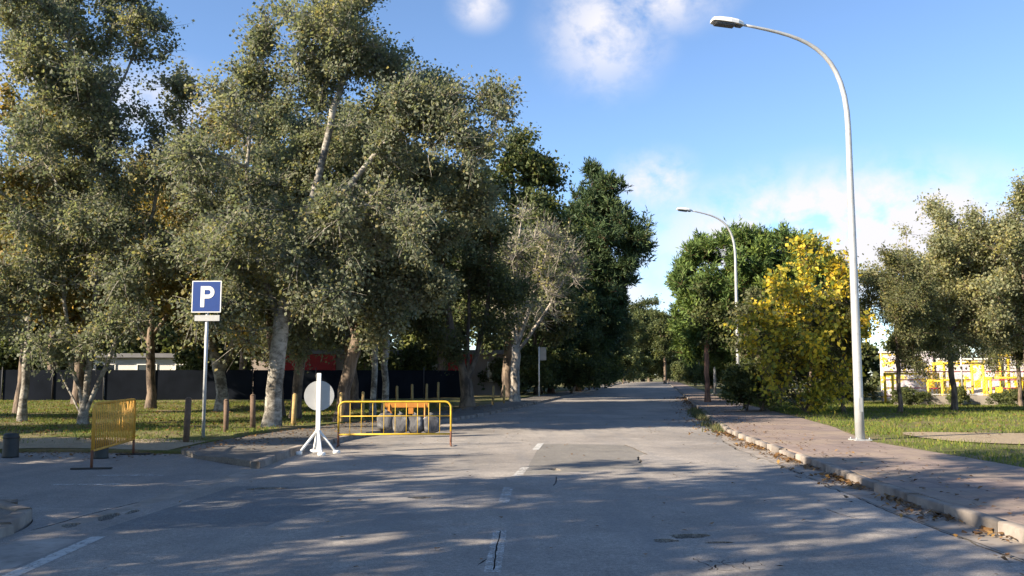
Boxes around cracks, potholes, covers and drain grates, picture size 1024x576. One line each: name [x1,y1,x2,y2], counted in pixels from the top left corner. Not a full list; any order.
crack [693,558,765,571]
crack [478,531,501,570]
